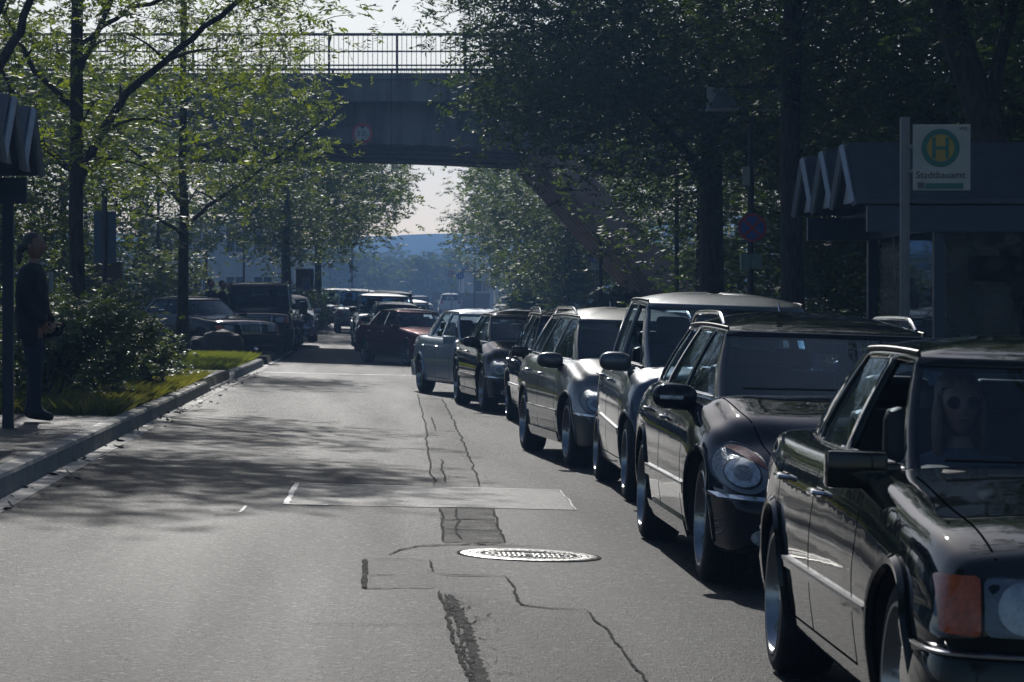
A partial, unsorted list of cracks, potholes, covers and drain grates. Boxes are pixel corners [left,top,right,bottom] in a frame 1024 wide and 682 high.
crack [361,507,649,682]
manhole cover [457,548,601,562]
crack [417,394,480,485]
